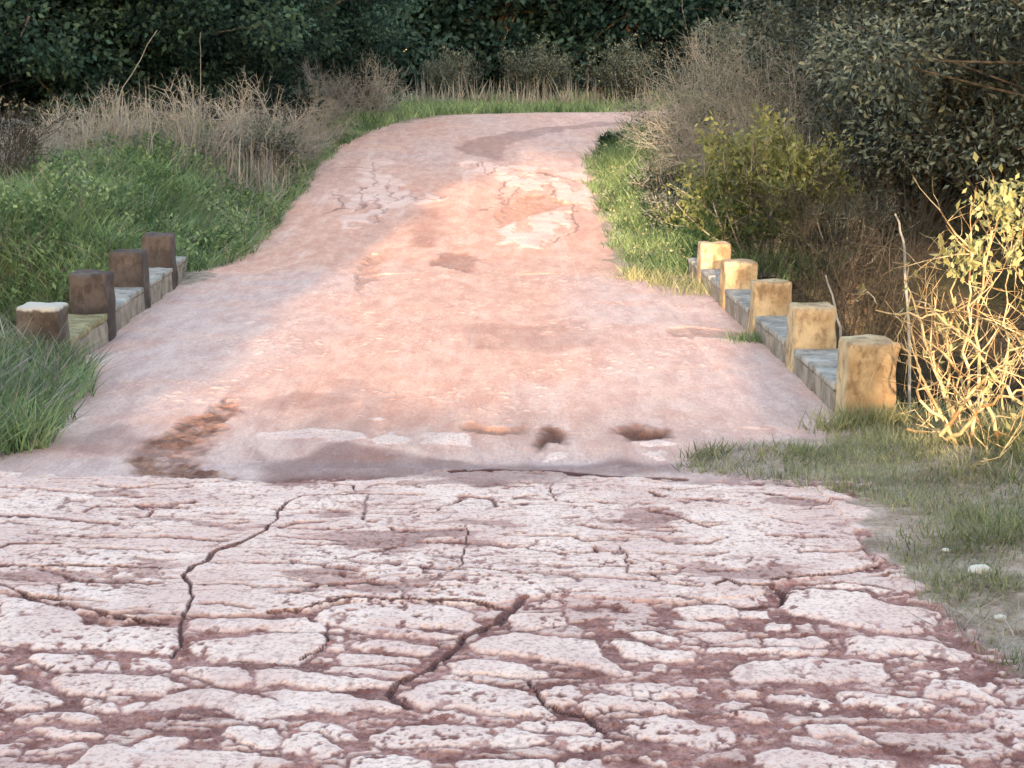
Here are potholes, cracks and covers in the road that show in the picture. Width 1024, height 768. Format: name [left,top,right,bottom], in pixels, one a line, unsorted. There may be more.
crack [712,567,879,611]
crack [321,162,448,223]
pothole [612,424,675,441]
pothole [531,426,569,451]
crack [447,468,690,482]
crack [476,162,597,243]
crack [0,493,607,735]
pothole [459,422,532,436]
pothole [121,393,243,481]
